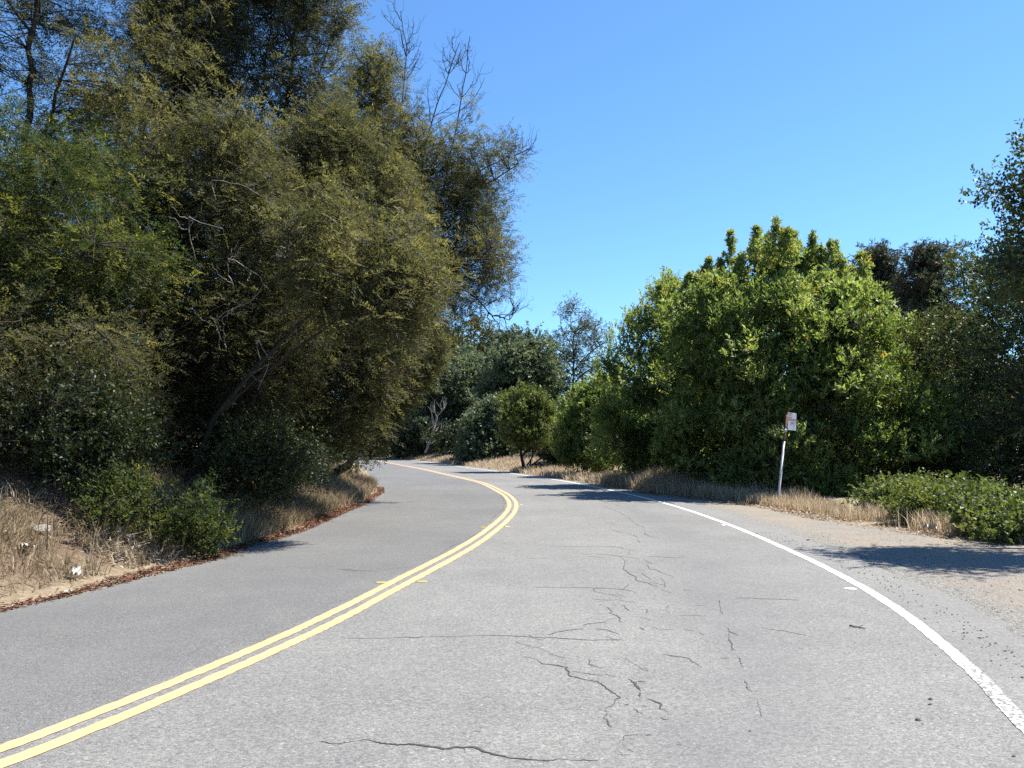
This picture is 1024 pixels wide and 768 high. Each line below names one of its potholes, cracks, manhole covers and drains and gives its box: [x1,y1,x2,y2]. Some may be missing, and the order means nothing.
crack [359,531,762,756]
crack [320,731,597,762]
